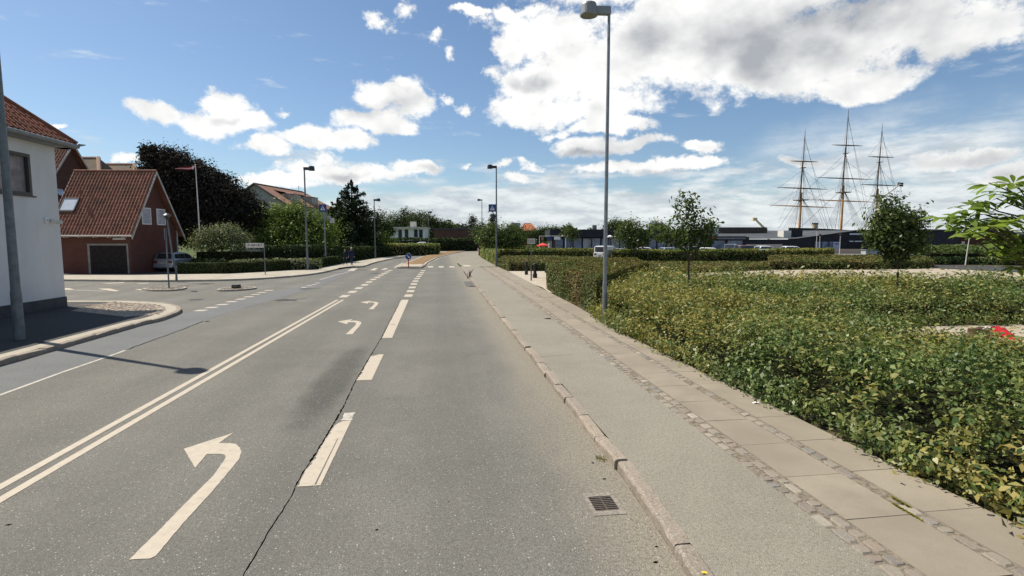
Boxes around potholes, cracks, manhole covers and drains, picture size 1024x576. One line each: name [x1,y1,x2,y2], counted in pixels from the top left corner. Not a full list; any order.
crack [243,302,400,576]
drain grate [582,491,627,516]
